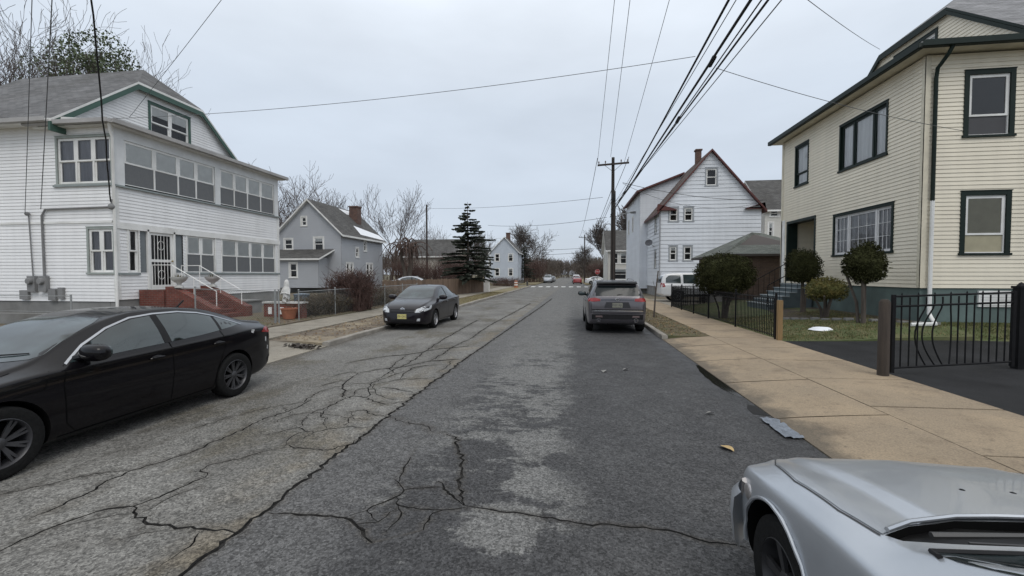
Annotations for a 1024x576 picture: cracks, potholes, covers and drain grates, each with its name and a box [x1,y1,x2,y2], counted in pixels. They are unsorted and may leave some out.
crack [0,299,746,576]
